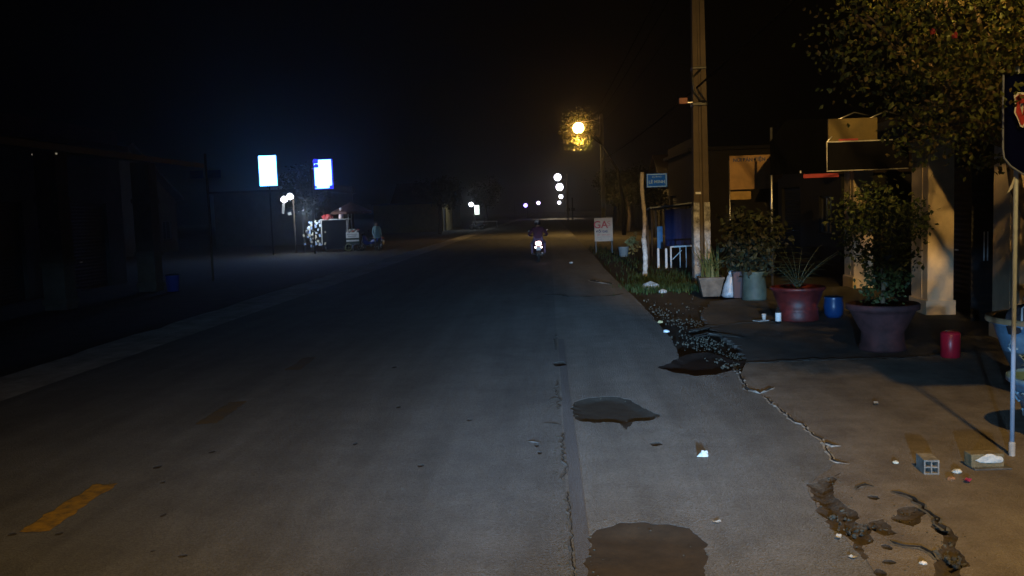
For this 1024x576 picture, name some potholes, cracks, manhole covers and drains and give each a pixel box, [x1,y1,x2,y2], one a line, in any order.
pothole [658,352,746,376]
crack [733,368,850,464]
pothole [931,521,970,576]
pothole [891,507,926,527]
pothole [807,473,878,560]
pothole [867,519,897,536]
